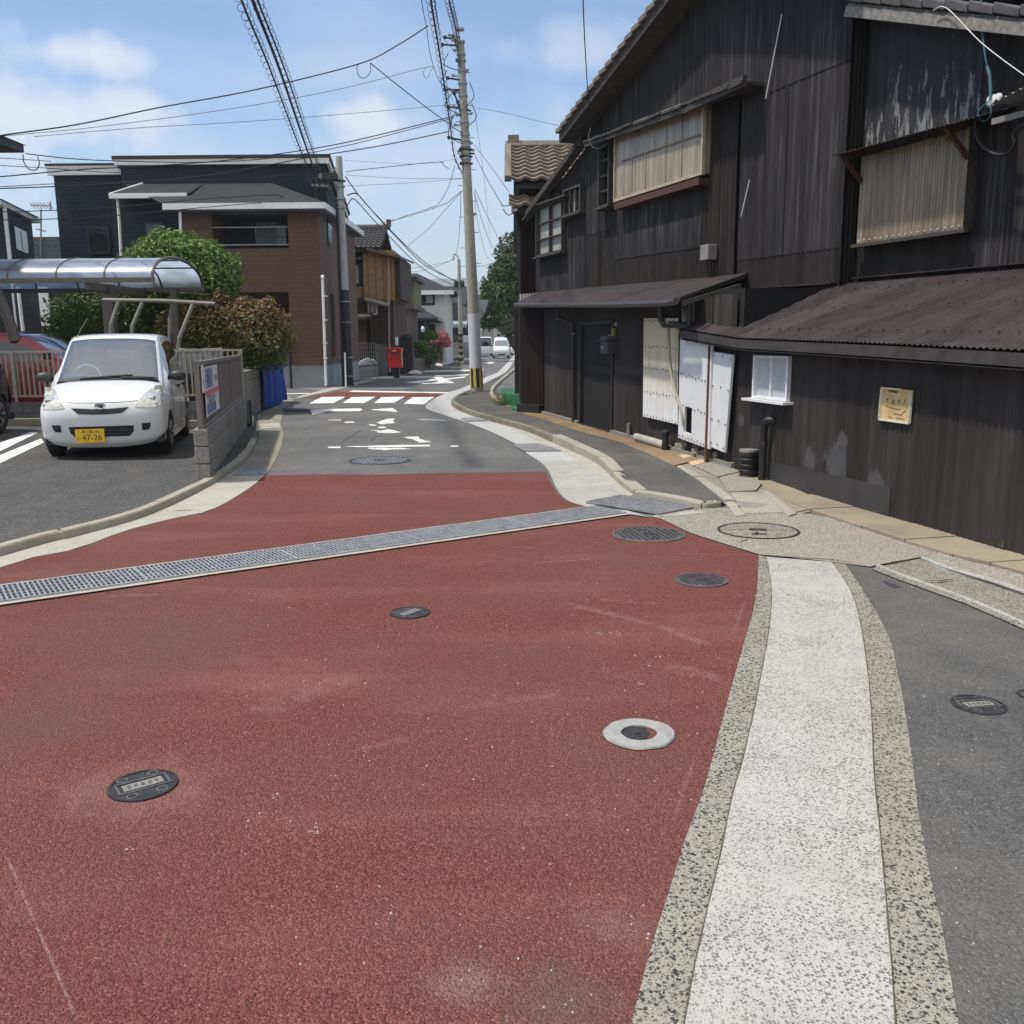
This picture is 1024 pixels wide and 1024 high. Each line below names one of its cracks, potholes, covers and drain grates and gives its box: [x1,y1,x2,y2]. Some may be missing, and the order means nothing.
drain grate [586,494,693,515]
manhole cover [717,522,800,539]
drain grate [512,443,561,452]
manhole cover [675,573,729,587]
drain grate [278,532,424,560]
manhole cover [612,526,686,542]
drain grate [400,517,533,542]
drain grate [134,548,298,581]
manhole cover [348,456,411,465]
manhole cover [107,769,179,802]
manhole cover [390,606,430,619]
drain grate [0,567,148,602]
